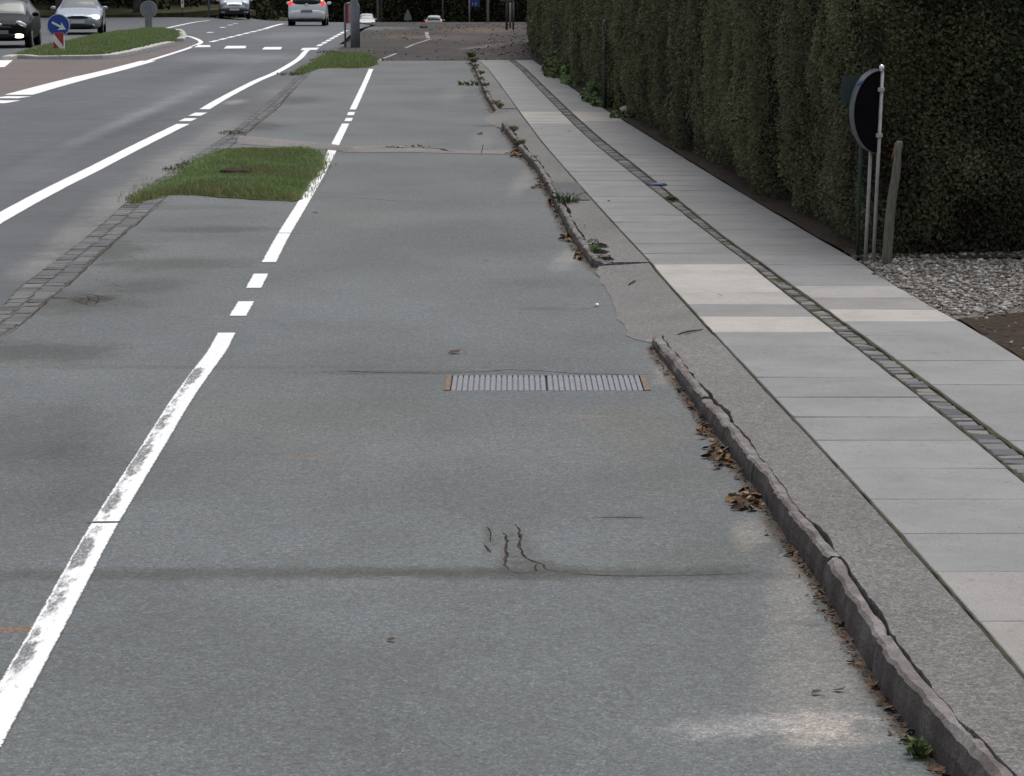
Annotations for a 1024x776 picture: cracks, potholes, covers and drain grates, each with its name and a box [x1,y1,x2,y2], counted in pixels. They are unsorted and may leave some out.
crack [485,525,748,576]
drain grate [444,375,650,391]
